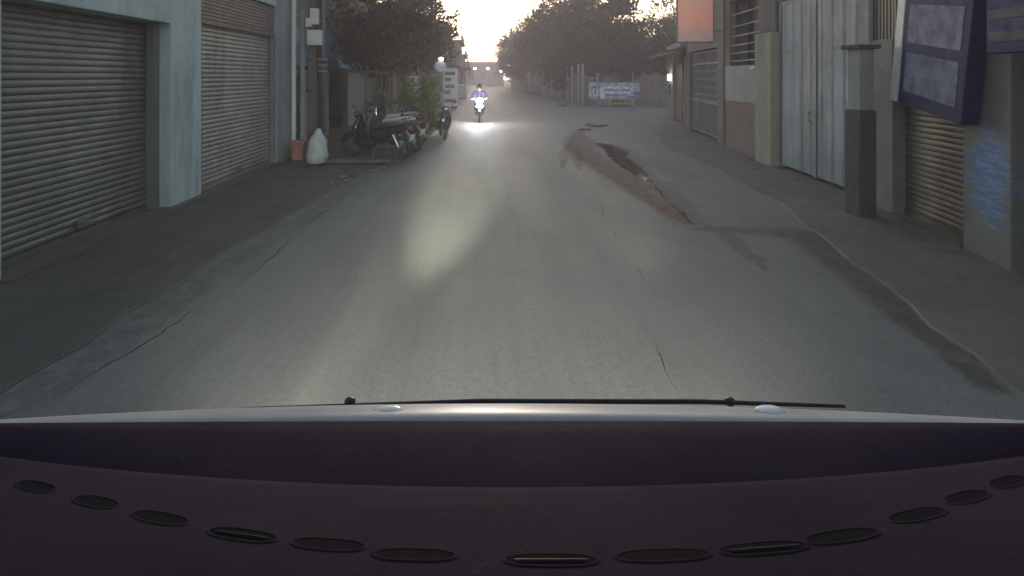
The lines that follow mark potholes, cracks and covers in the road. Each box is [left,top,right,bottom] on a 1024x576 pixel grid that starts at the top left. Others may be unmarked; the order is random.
crack [654,184,694,226]
pothole [594,143,654,183]
